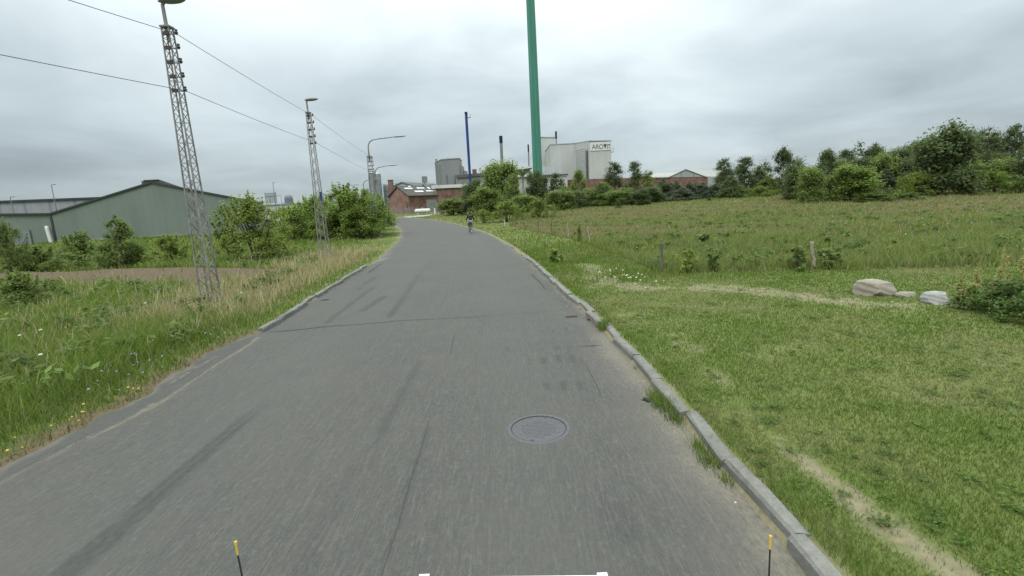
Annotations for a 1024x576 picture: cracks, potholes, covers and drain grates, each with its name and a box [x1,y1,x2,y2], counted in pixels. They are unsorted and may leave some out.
crack [275,317,471,353]
manhole cover [507,414,571,444]
crack [381,419,430,576]
